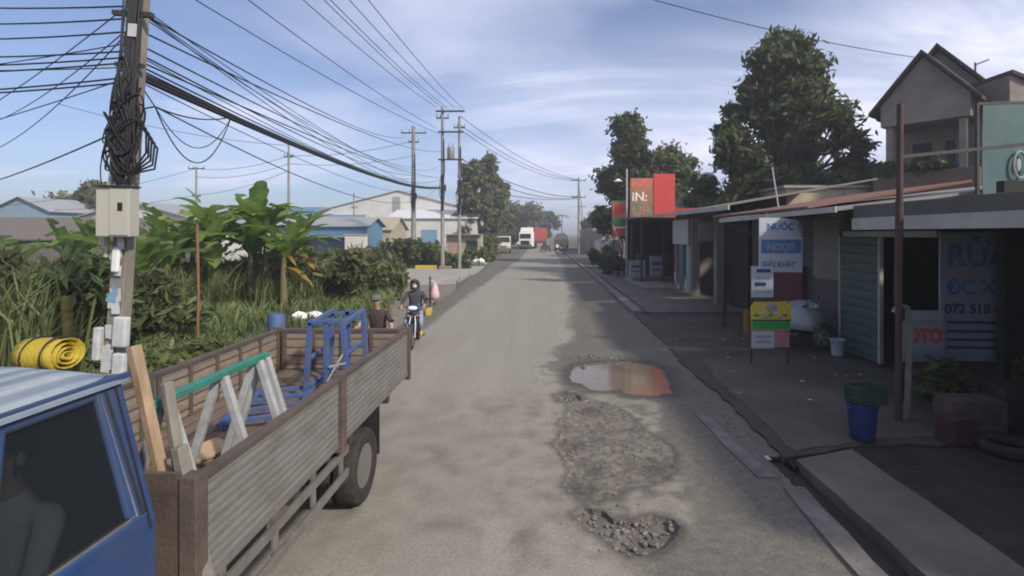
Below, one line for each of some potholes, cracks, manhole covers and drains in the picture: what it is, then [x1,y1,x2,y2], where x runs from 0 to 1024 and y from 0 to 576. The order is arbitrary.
pothole [569,361,673,396]
pothole [551,399,676,502]
pothole [573,507,680,557]
pothole [555,393,581,404]
